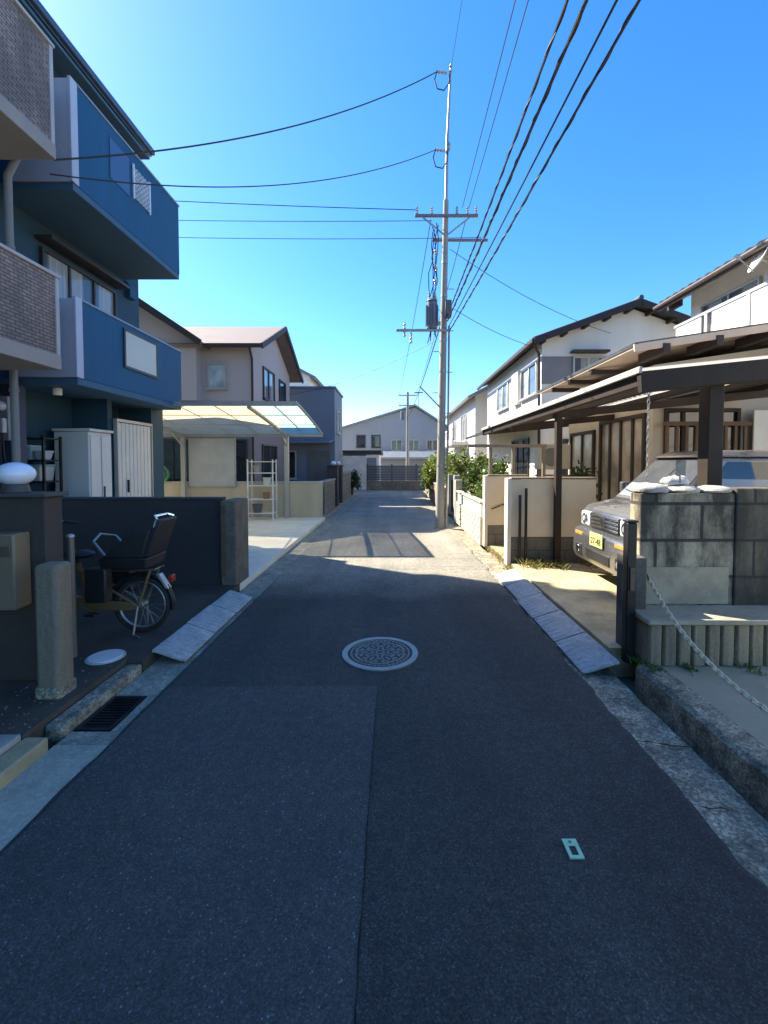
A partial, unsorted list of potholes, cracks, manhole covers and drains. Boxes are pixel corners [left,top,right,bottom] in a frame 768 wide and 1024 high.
manhole cover [85,649,126,665]
manhole cover [342,637,418,671]
drain grate [74,696,146,732]
